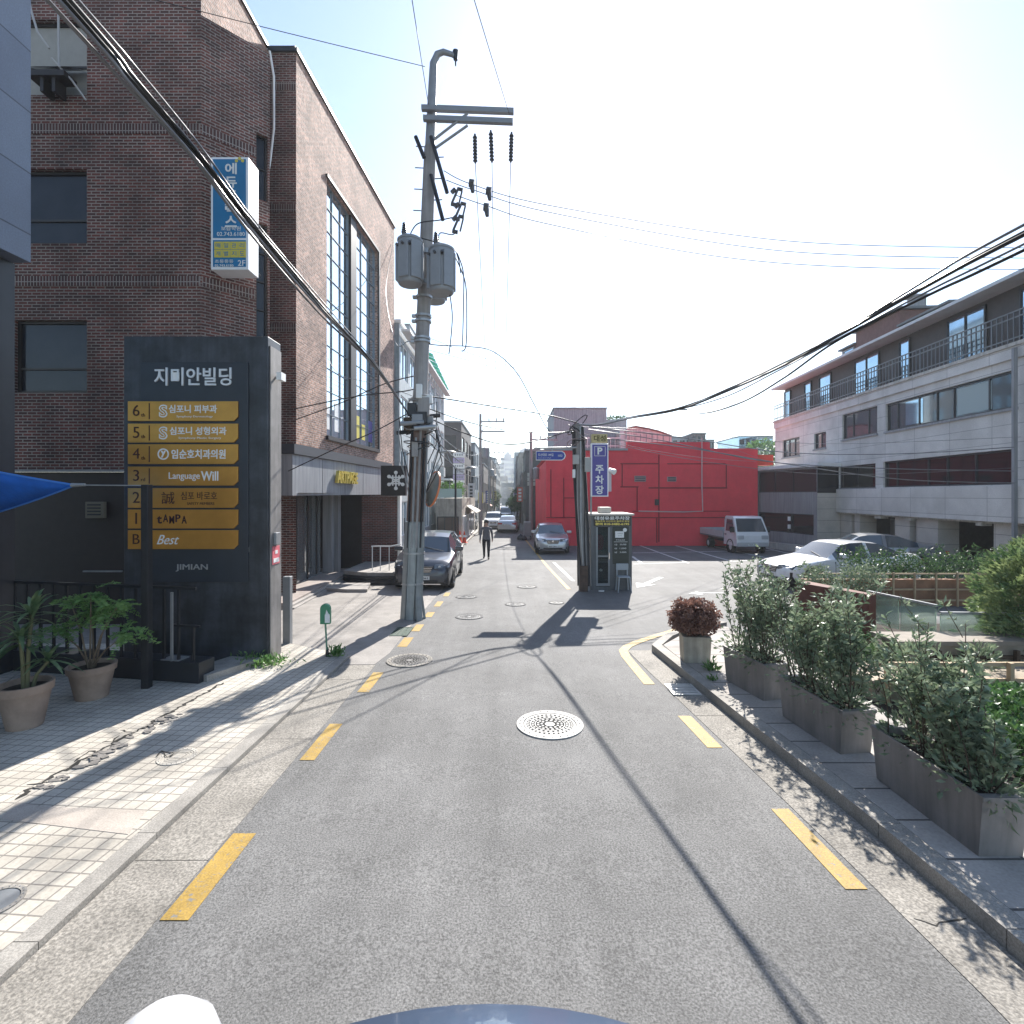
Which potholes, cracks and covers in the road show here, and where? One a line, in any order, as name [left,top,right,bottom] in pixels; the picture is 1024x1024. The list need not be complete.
crack [914,918,967,926]
manhole cover [386,653,432,668]
manhole cover [0,884,27,914]
manhole cover [156,748,198,766]
crack [16,683,224,799]
